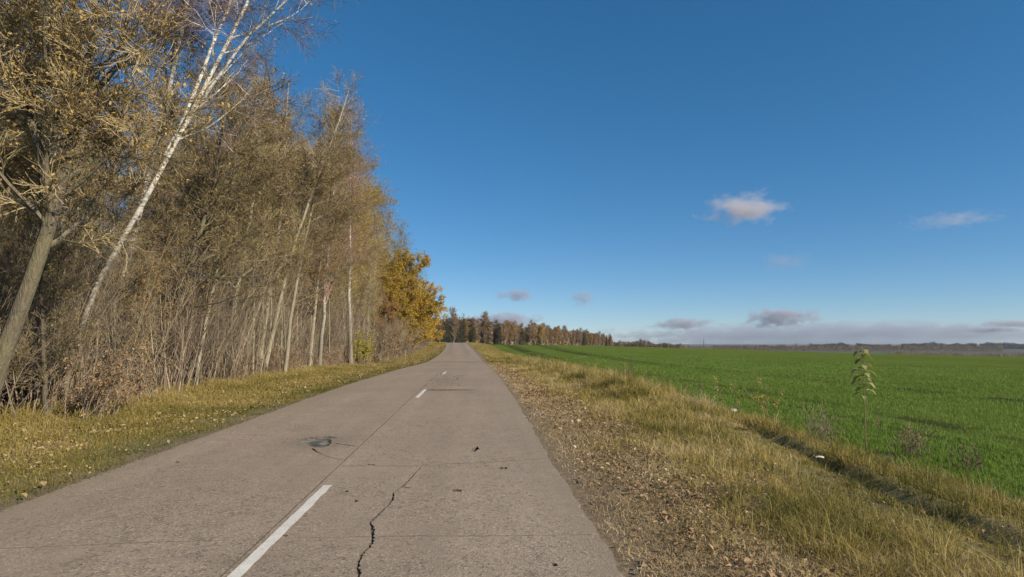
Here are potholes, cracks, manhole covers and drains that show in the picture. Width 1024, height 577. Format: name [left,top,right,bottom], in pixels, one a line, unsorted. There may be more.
pothole [298,436,337,448]
crack [311,443,592,577]
